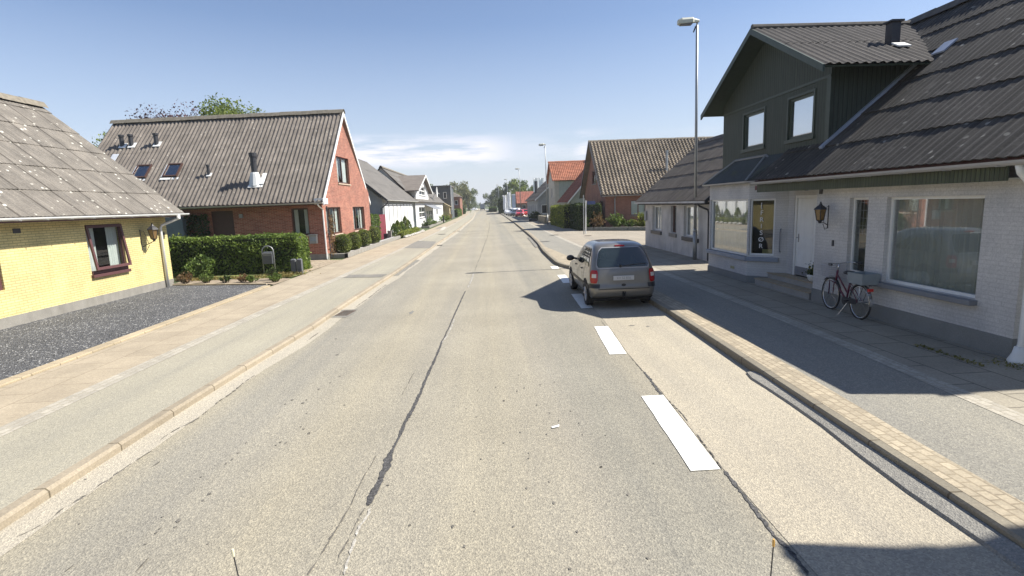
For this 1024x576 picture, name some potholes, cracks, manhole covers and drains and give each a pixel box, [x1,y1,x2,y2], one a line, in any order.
crack [307,456,376,575]
